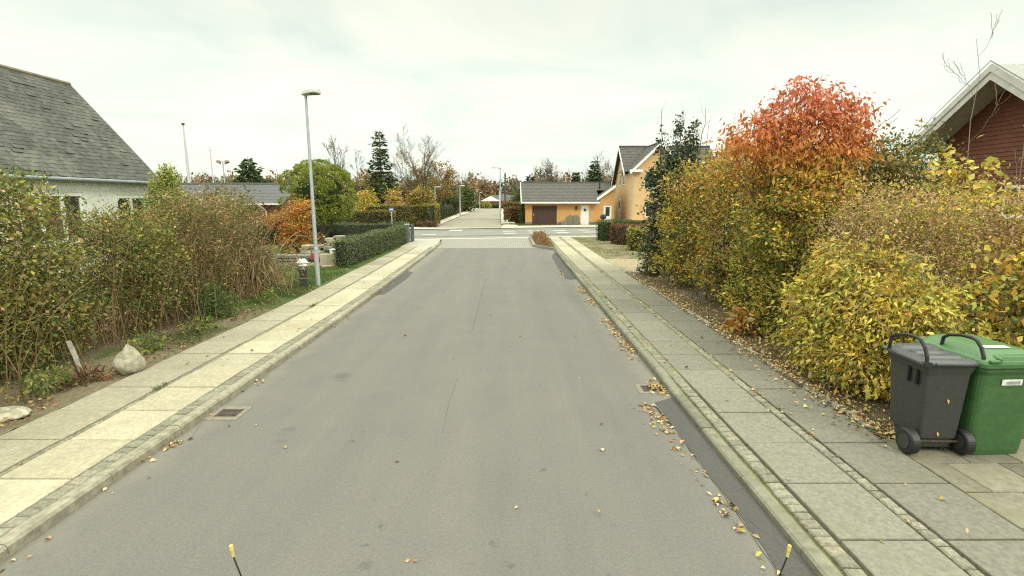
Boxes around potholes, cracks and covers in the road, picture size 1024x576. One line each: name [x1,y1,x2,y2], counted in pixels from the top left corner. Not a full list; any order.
drain grate [202,406,253,420]
drain grate [635,384,669,394]
